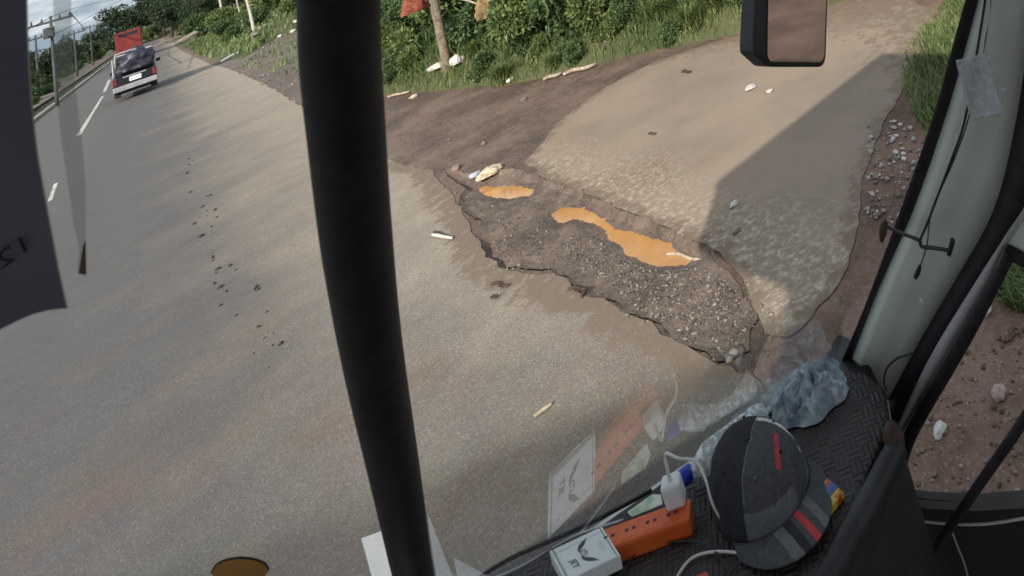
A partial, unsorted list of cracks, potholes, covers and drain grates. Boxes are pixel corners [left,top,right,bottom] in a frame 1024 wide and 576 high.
pothole [445,168,758,362]
